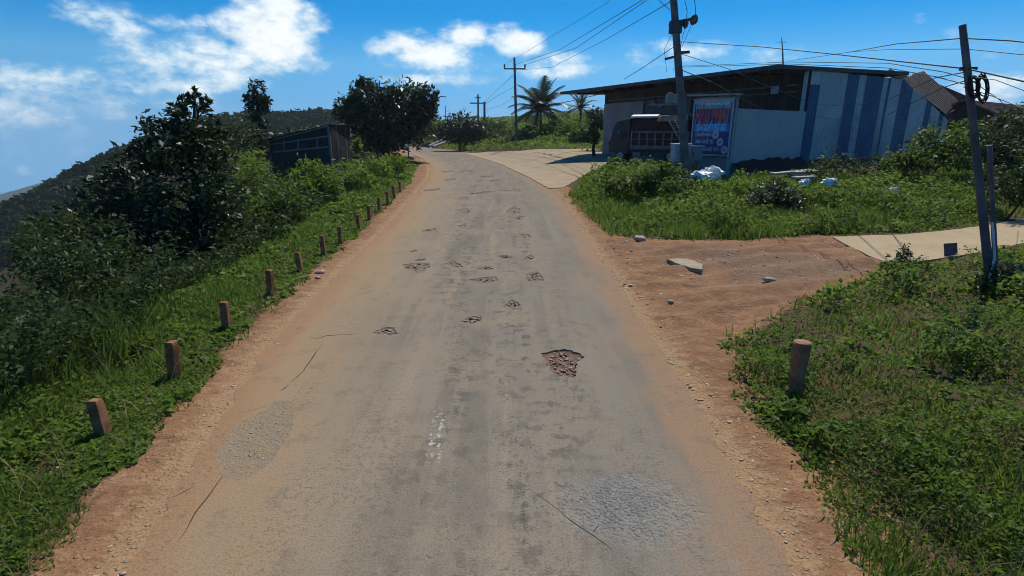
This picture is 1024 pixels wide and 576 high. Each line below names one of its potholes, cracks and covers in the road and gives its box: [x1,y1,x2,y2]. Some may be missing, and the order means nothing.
crack [282,334,352,390]
pothole [402,263,431,273]
pothole [373,327,398,335]
pothole [526,272,544,282]
crack [526,486,613,551]
pothole [541,349,584,378]
crack [176,476,223,540]
